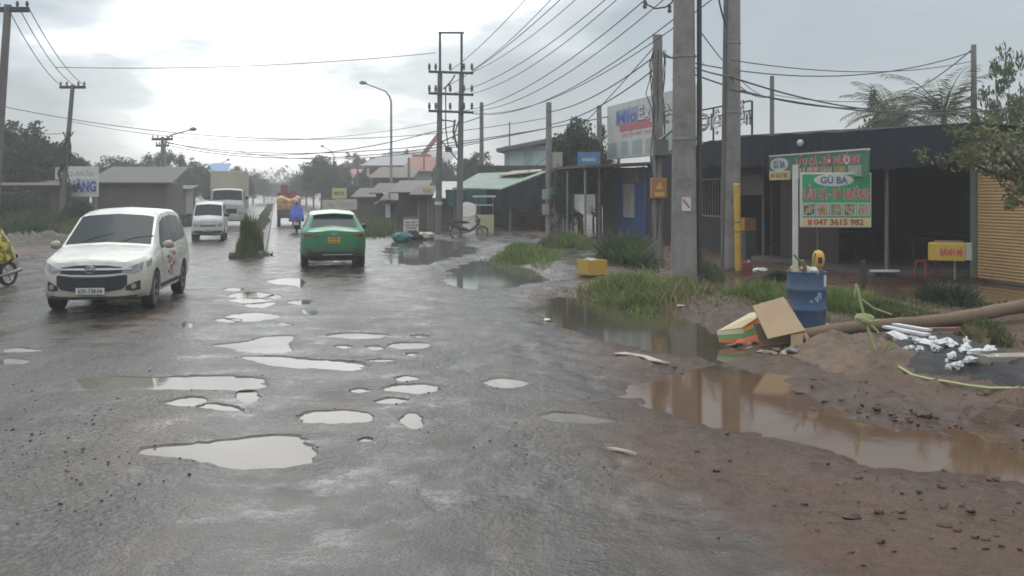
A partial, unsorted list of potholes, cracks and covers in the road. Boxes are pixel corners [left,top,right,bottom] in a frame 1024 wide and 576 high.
pothole [234,389,260,403]
pothole [223,312,281,322]
pothole [136,433,319,470]
pothole [479,376,533,388]
pothole [295,408,375,424]
pothole [196,402,244,411]
pothole [265,277,307,288]
pothole [235,355,368,371]
pothole [159,396,208,407]
pothole [210,334,296,354]
pothole [537,410,623,424]
pothole [0,357,31,365]
